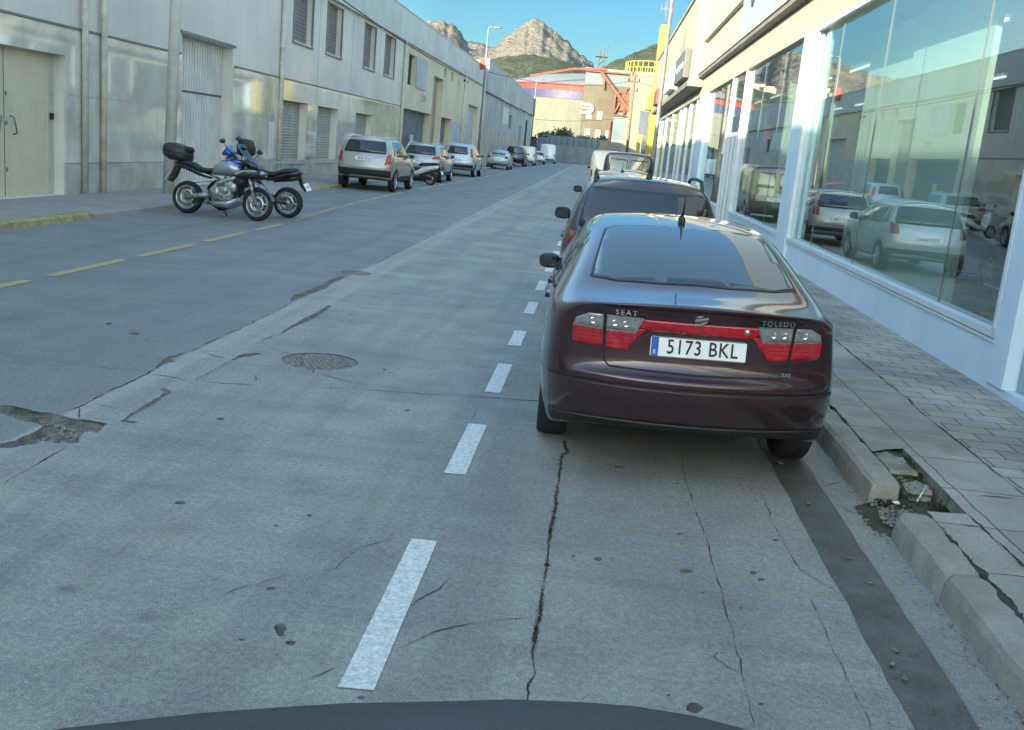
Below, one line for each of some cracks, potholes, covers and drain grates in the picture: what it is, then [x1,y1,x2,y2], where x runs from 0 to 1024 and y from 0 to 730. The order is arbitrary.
crack [811,600,872,730]
crack [406,444,567,700]
manhole cover [282,353,357,370]
crack [6,299,294,424]
pothole [854,446,960,548]
crack [681,451,756,729]
pothole [0,405,107,448]
